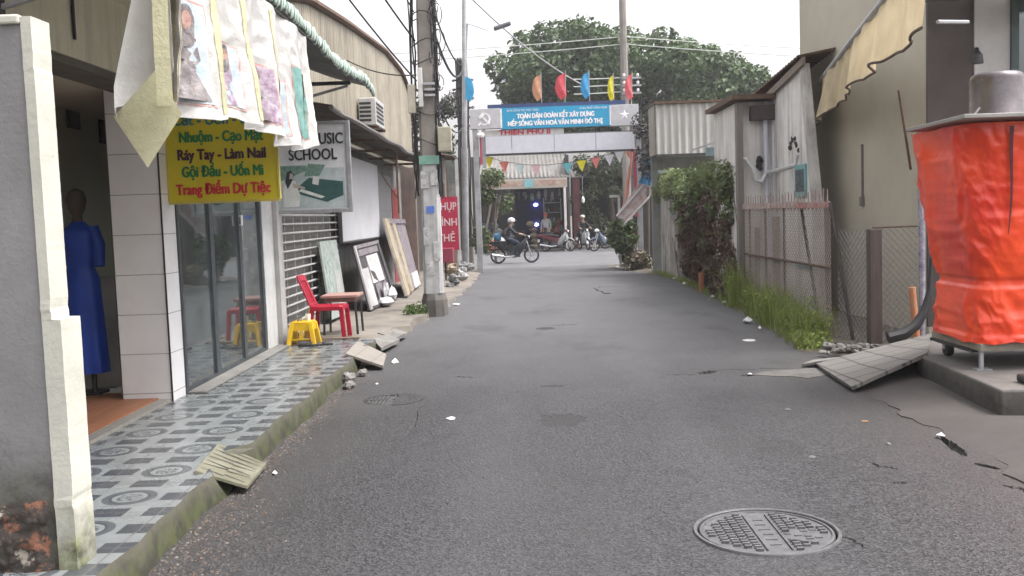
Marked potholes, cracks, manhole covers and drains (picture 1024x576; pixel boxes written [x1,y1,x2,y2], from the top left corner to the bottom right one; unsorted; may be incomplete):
crack [394,398,431,450]
manhole cover [360,393,423,406]
manhole cover [693,508,842,558]
